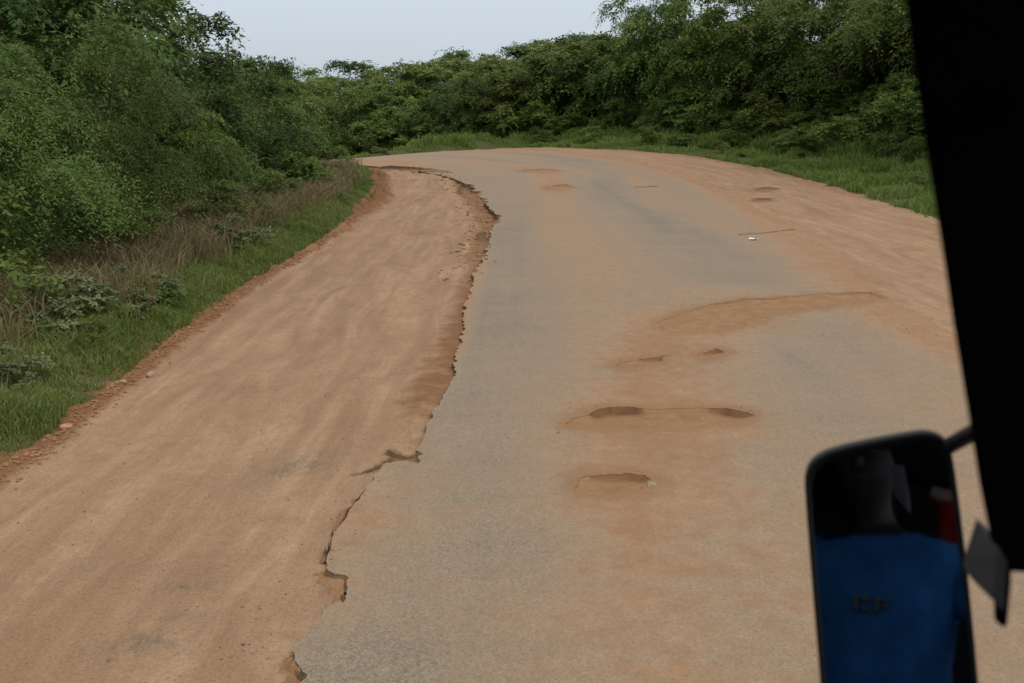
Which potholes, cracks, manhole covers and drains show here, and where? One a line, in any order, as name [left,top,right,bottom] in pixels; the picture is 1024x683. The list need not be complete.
pothole [616,356,663,369]
pothole [575,473,651,494]
pothole [698,349,724,360]
pothole [566,407,754,429]
crack [320,492,364,564]
